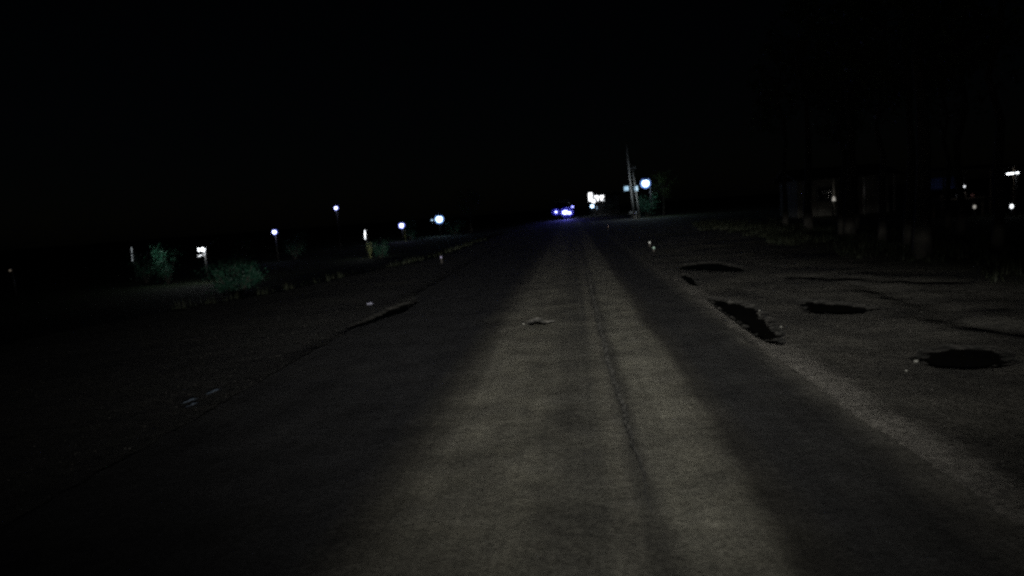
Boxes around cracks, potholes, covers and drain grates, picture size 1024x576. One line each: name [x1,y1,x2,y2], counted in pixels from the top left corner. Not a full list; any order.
pothole [909,344,1020,370]
pothole [680,273,700,286]
pothole [795,299,882,315]
pothole [674,261,751,272]
pothole [706,296,786,345]
